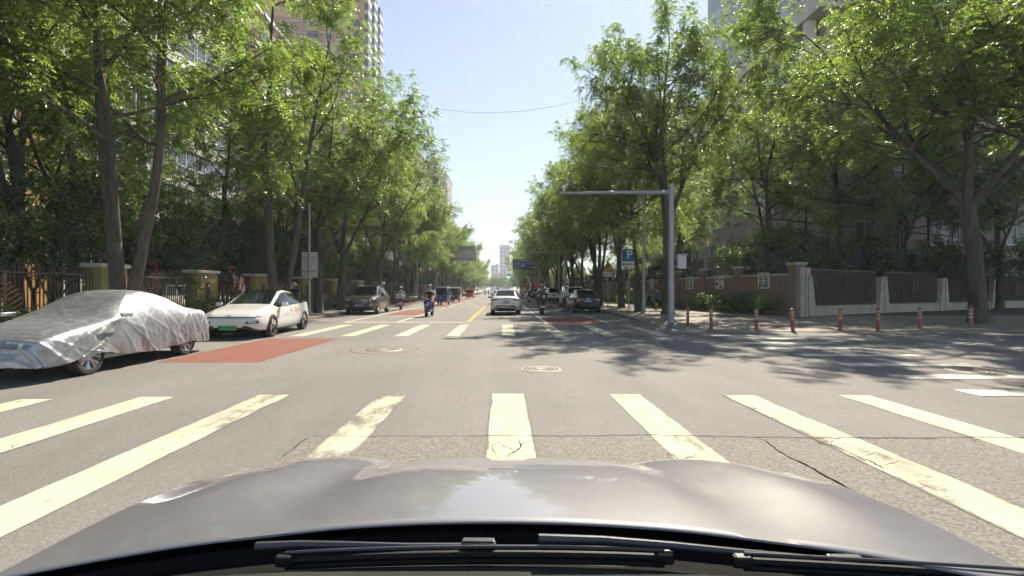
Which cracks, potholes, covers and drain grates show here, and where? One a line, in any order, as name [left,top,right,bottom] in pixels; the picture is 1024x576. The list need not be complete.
crack [759,438,897,490]
manhole cover [943,366,1013,375]
manhole cover [349,346,418,354]
